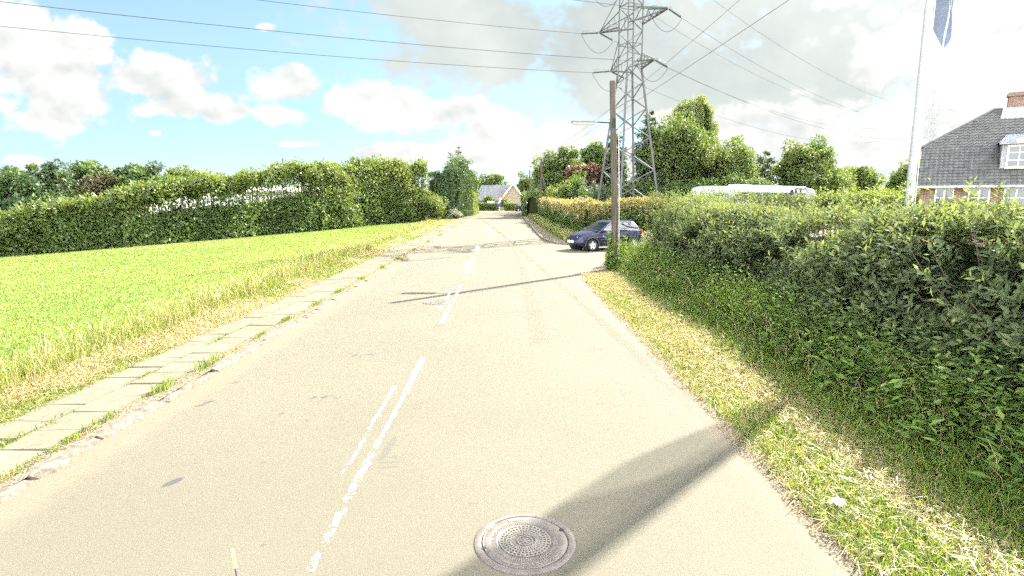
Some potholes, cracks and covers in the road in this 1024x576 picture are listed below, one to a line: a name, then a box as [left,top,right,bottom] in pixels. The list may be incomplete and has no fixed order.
manhole cover [474,513,576,576]
